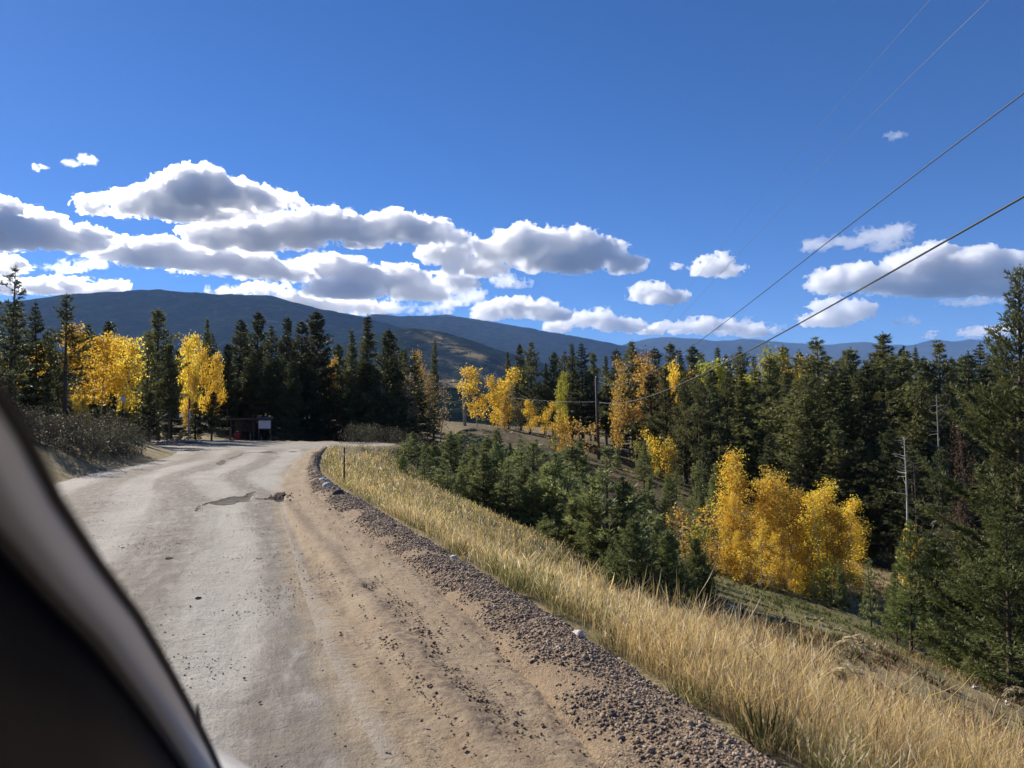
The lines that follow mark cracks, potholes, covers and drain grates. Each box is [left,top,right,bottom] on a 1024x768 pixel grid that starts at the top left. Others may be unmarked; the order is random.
pothole [208,492,254,505]
